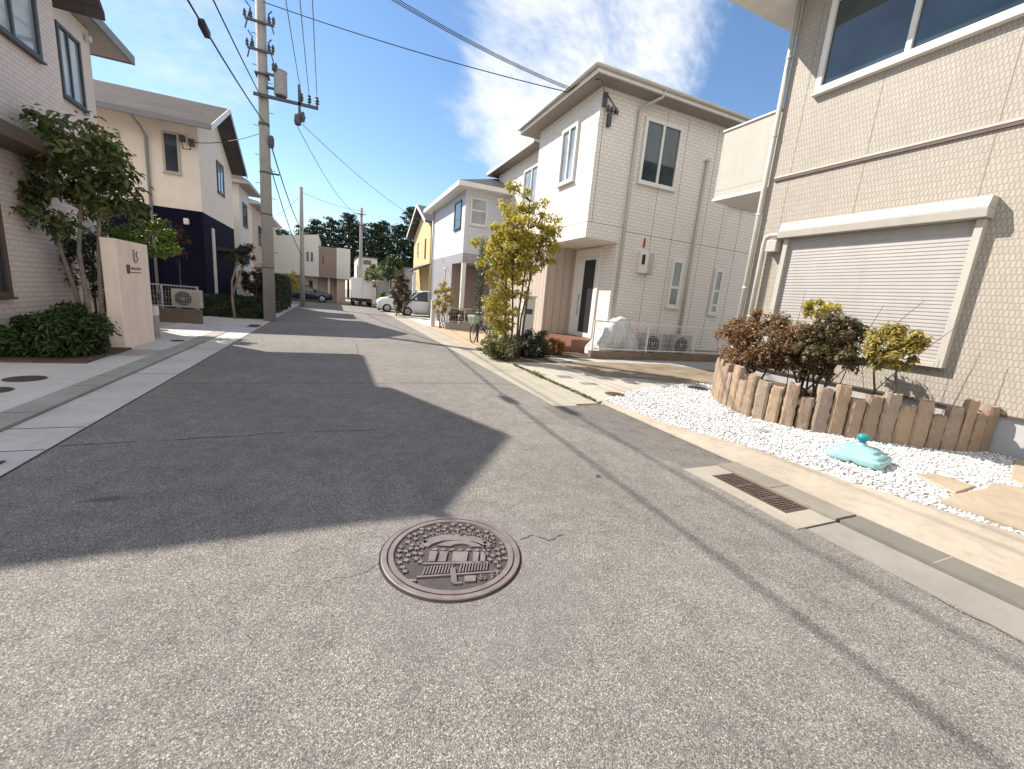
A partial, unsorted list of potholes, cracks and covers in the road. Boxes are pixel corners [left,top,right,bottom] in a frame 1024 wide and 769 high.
drain grate [712,473,809,513]
manhole cover [379,516,522,604]
